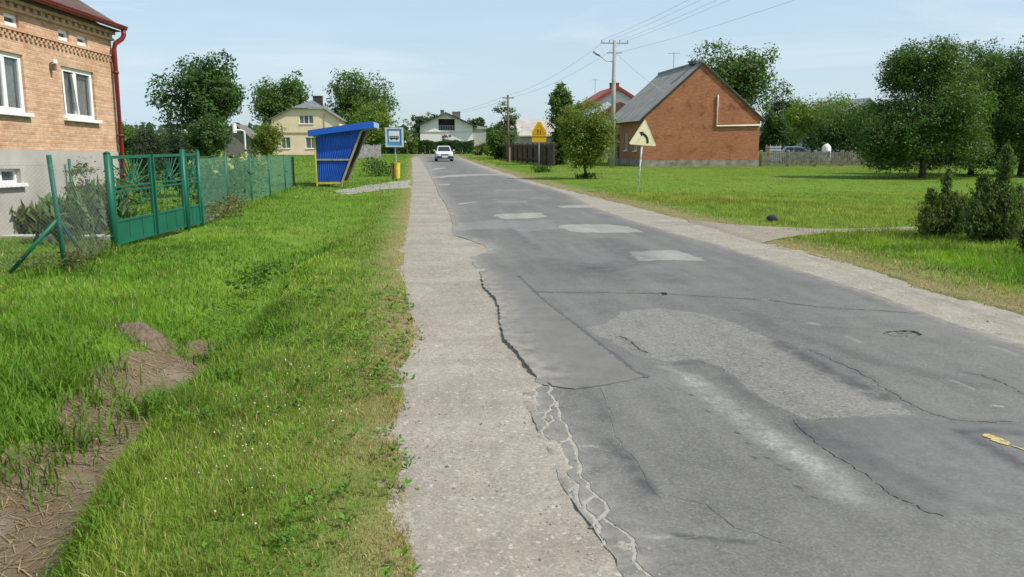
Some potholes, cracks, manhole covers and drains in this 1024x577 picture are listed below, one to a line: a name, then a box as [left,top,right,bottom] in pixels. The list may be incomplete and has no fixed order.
crack [670,495,781,543]
crack [532,382,661,577]
crack [809,349,1011,423]
crack [794,422,943,516]
